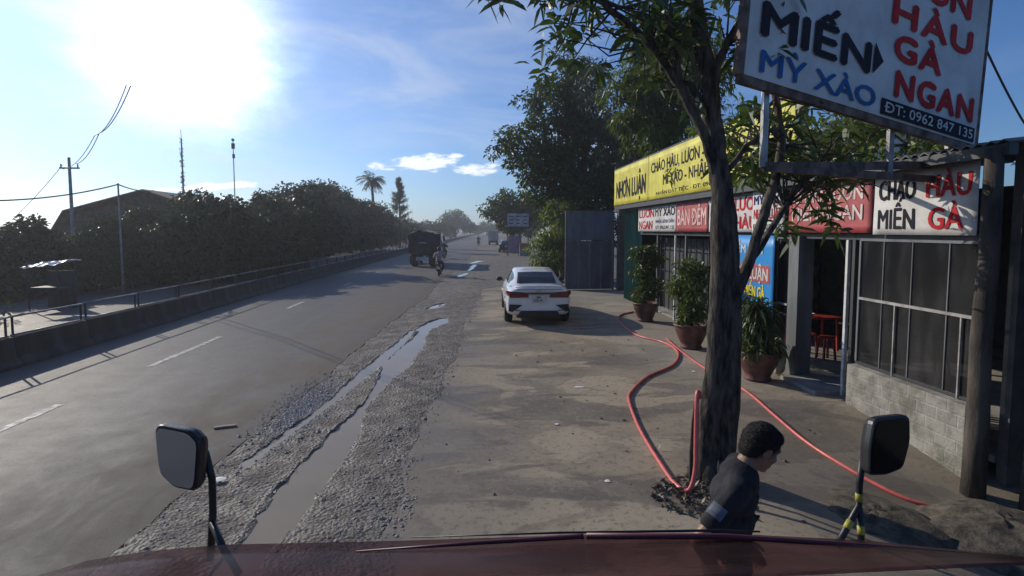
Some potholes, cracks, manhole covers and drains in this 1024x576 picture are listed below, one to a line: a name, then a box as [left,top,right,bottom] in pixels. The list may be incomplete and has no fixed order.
pothole [208,318,450,576]
